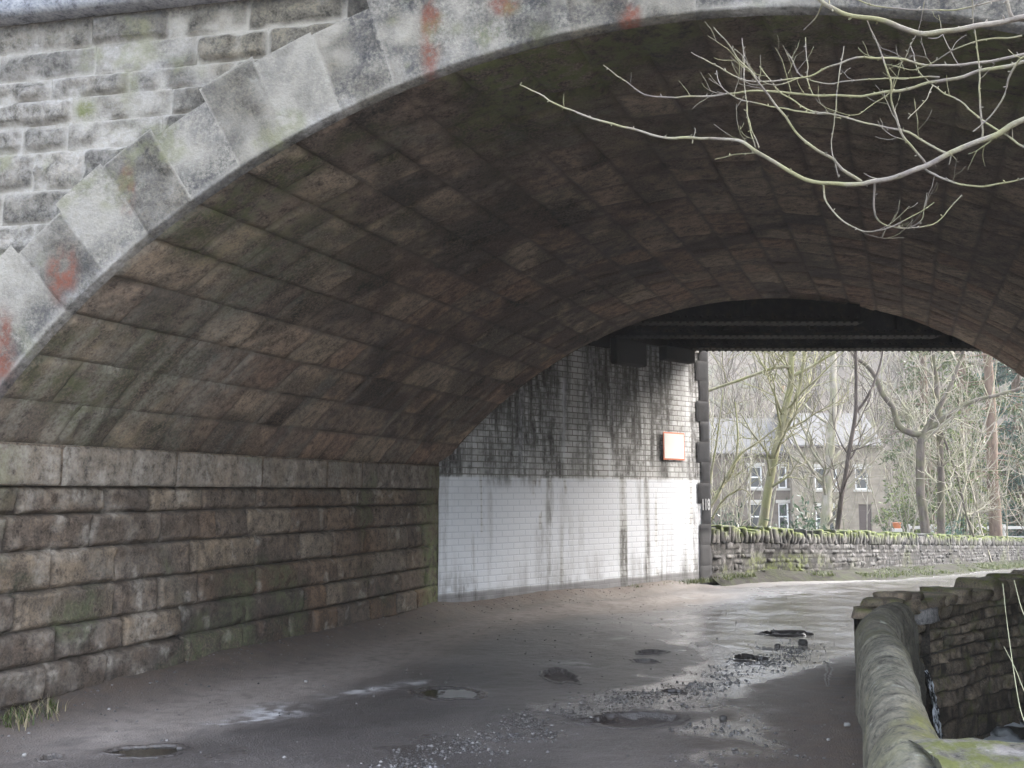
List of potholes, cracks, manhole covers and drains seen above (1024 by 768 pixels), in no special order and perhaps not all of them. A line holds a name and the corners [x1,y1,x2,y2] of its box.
pothole [98,743,191,759]
pothole [409,686,485,700]
pothole [37,753,65,762]
pothole [538,666,582,685]
pothole [730,653,773,663]
pothole [557,710,691,730]
